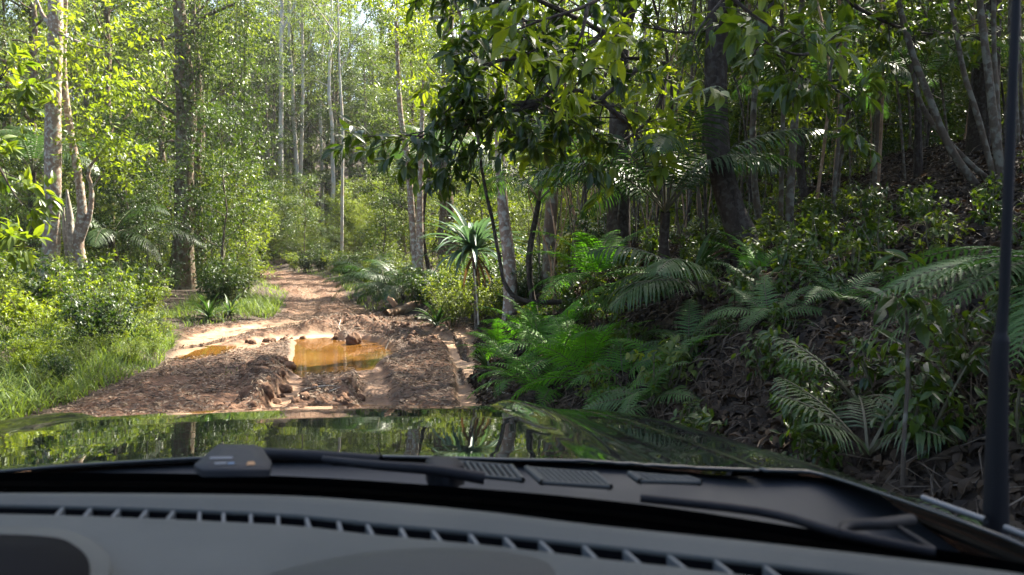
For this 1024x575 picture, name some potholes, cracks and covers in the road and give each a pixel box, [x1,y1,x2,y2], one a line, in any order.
pothole [175,342,236,359]
pothole [283,332,401,379]
